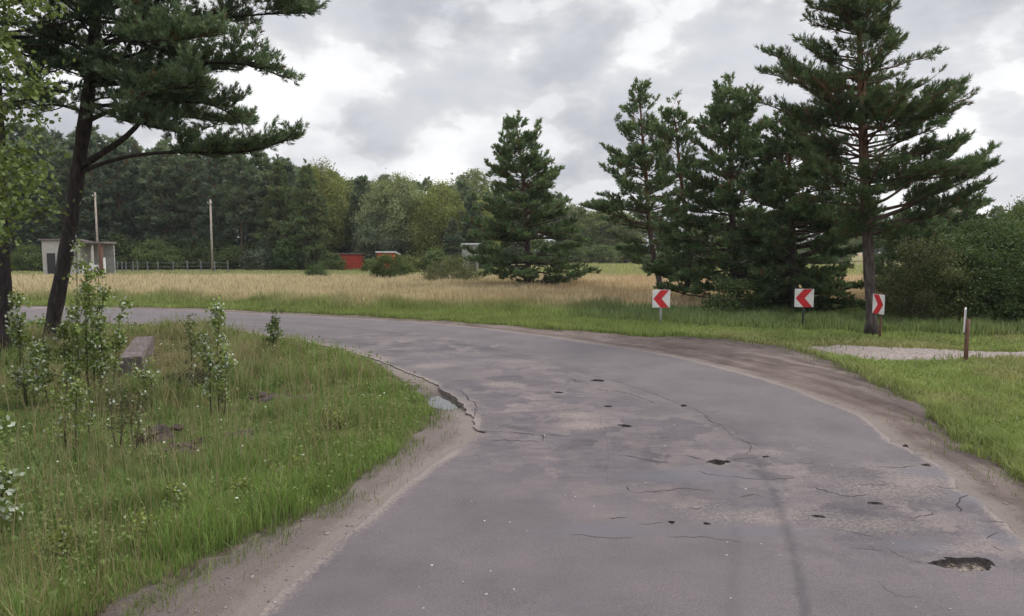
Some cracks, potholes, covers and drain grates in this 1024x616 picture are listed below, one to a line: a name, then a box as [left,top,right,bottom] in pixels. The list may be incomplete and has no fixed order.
crack [494,353,913,509]
pothole [928,557,996,572]
crack [572,517,662,539]
